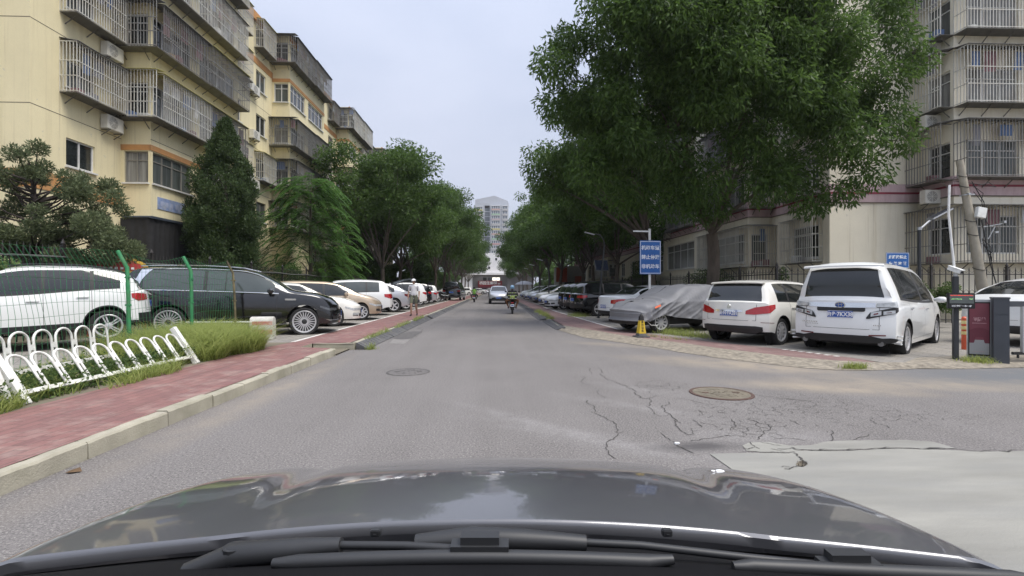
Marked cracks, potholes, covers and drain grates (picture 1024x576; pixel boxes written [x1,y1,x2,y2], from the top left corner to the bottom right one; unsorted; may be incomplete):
crack [582,360,976,469]
manhole cover [386,368,430,376]
manhole cover [689,387,755,401]
